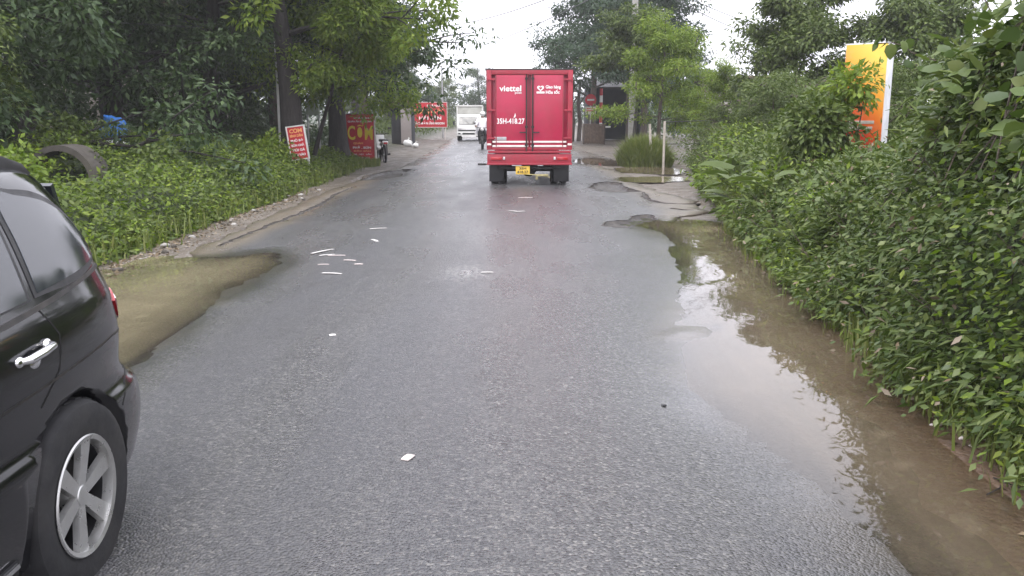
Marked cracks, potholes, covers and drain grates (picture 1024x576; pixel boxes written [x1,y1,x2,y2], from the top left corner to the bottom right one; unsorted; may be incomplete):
pothole [588,181,642,193]
pothole [602,214,658,228]
